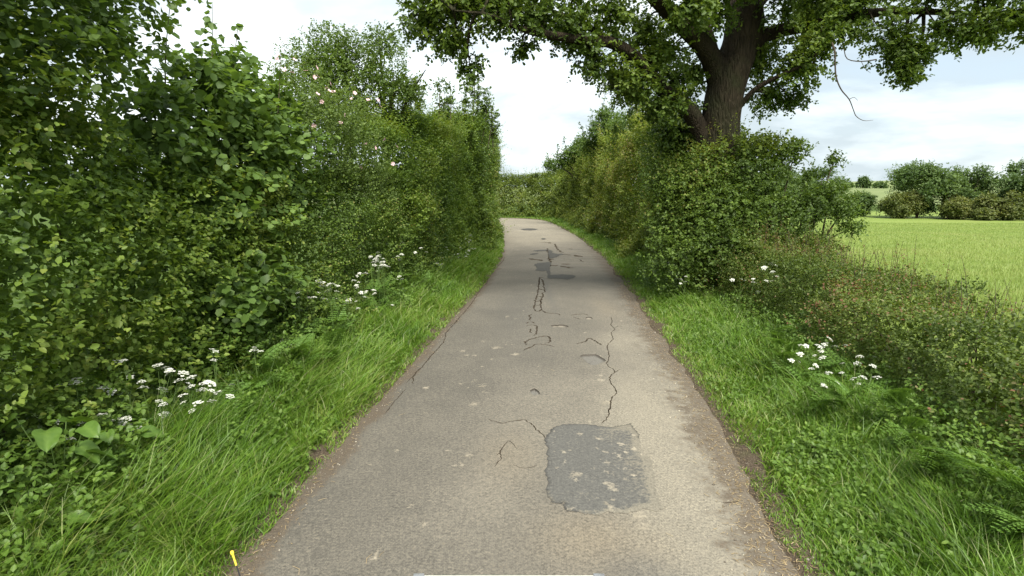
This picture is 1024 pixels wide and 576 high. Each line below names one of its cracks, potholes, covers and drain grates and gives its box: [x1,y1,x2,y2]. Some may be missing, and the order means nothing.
pothole [580,354,606,365]
crack [577,318,623,423]
crack [523,242,588,350]
crack [489,419,545,468]
